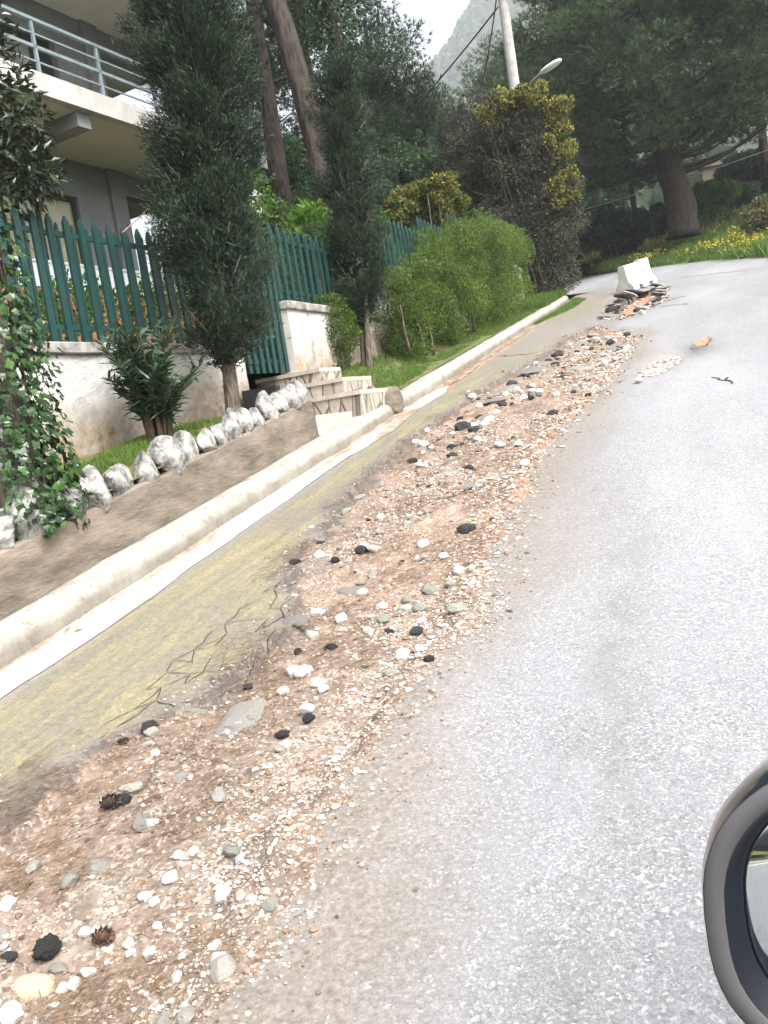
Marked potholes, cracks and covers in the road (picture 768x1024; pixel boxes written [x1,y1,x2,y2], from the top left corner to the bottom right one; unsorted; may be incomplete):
crack [103,582,306,727]
pothole [613,289,660,318]
pothole [0,326,637,1024]
